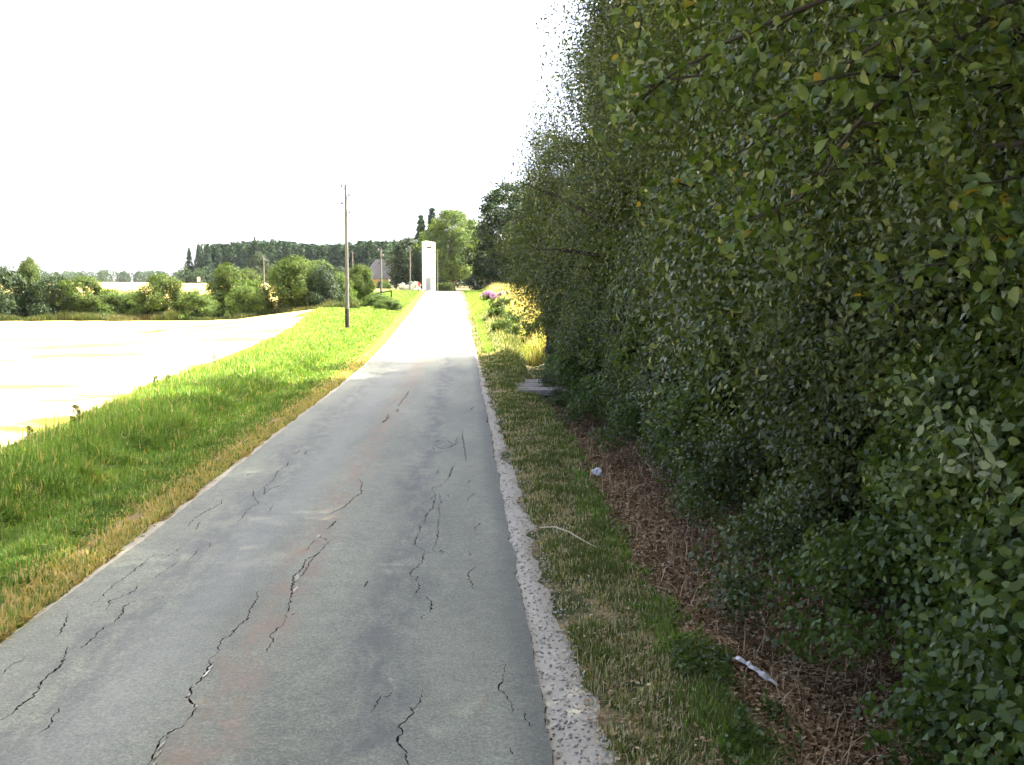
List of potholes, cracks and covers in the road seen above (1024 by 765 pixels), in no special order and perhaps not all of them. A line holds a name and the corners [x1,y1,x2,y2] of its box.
crack [266,479,363,651]
crack [401,431,480,618]
crack [498,664,530,754]
crack [148,592,258,765]
crack [371,689,423,765]
crack [1,451,307,732]
